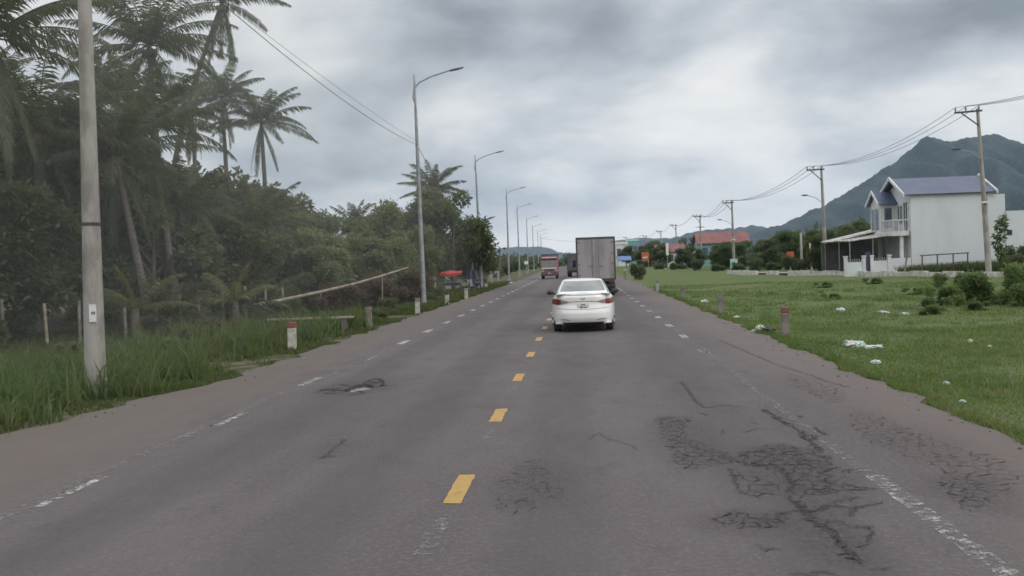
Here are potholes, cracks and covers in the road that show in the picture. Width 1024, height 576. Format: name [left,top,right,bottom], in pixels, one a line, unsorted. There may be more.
crack [655,382,889,575]
pothole [317,378,385,395]
crack [491,459,563,513]
crack [850,414,1022,510]
crack [720,340,849,402]
